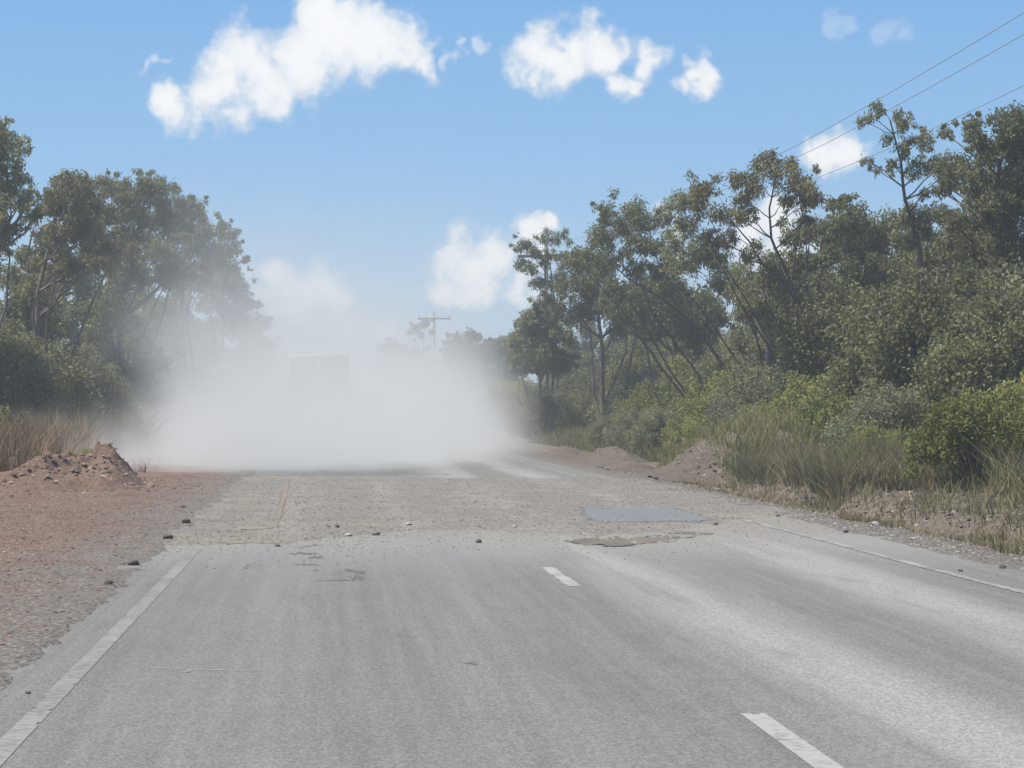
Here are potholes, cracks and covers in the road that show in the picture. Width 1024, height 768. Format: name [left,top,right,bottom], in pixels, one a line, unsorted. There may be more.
crack [290,545,365,581]
pothole [566,536,677,545]
